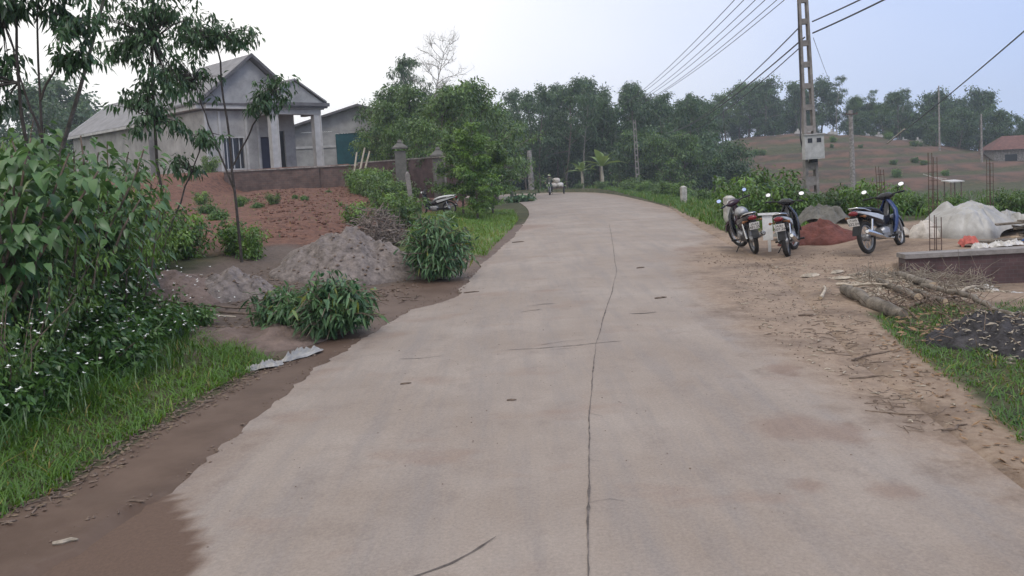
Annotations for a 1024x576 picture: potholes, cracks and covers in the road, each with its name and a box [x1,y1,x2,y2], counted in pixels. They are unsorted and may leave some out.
crack [415,536,496,576]
crack [510,224,623,576]
